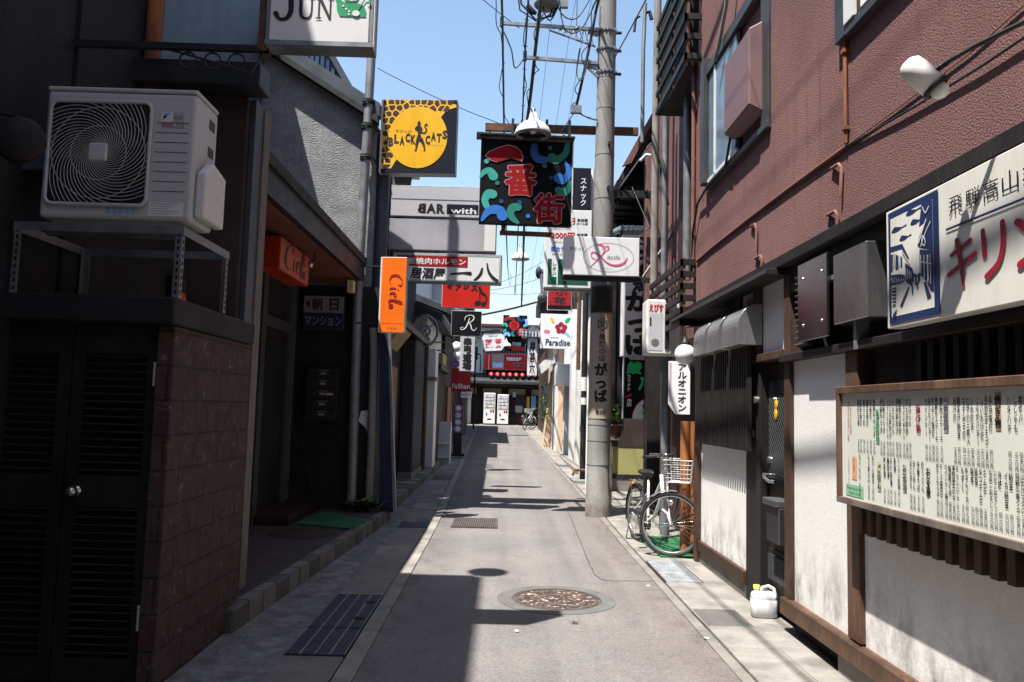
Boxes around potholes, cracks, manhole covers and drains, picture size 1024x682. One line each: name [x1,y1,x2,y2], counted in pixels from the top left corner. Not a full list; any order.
drain grate [309,594,383,630]
manhole cover [497,586,616,615]
drain grate [284,626,362,659]
